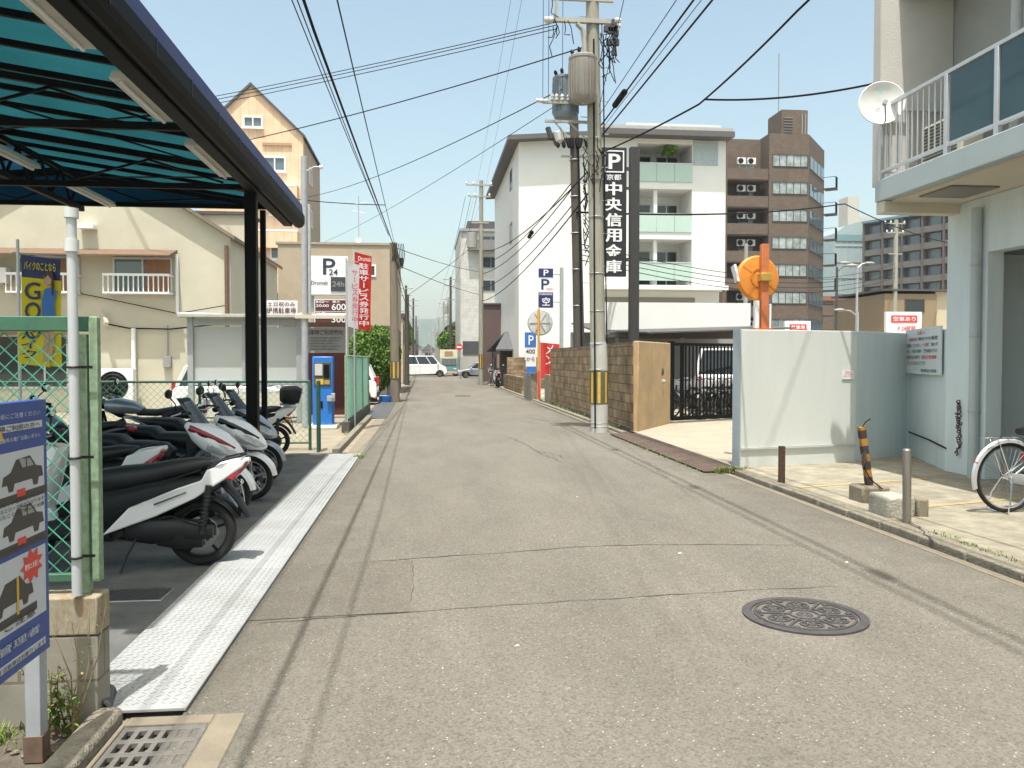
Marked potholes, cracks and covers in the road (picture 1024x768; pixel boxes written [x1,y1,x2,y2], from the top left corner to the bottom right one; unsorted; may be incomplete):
drain grate [86,713,246,768]
drain grate [109,588,174,602]
manhole cover [742,597,870,636]
